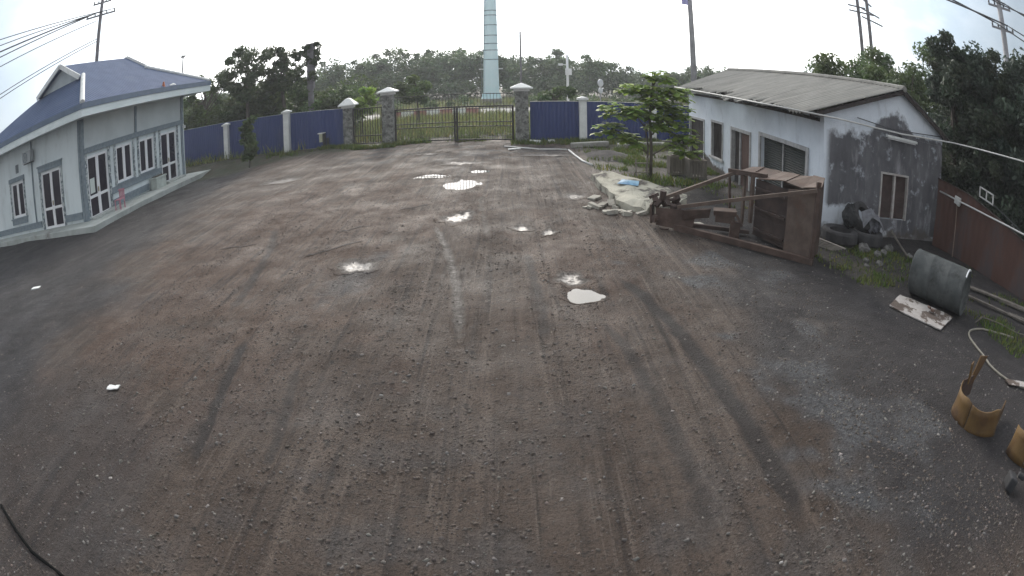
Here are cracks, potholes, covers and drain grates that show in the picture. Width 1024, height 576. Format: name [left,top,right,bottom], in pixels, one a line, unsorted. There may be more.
pothole [439,178,487,191]
pothole [328,255,388,276]
pothole [544,267,599,288]
pothole [506,222,535,232]
pothole [432,207,482,227]
pothole [539,227,562,238]
pothole [559,285,612,305]
